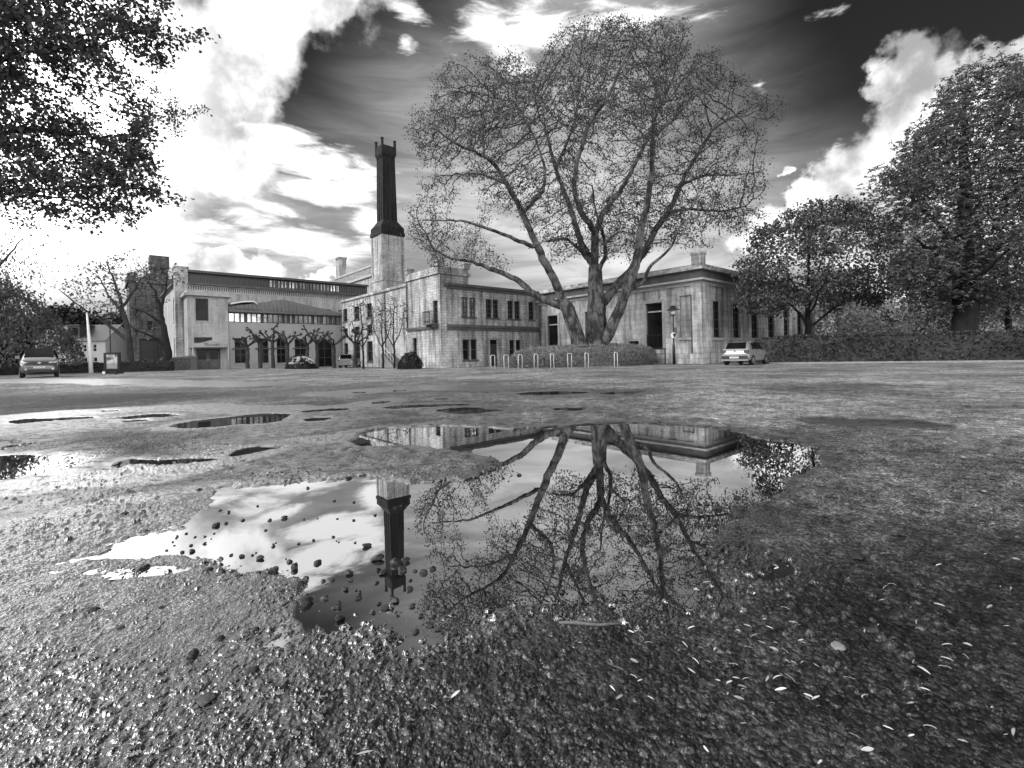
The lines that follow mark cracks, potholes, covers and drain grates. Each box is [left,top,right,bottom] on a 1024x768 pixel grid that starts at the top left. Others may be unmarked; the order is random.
pothole [7,416,95,424]
pothole [0,454,90,480]
pothole [167,413,294,428]
pothole [51,421,833,664]
